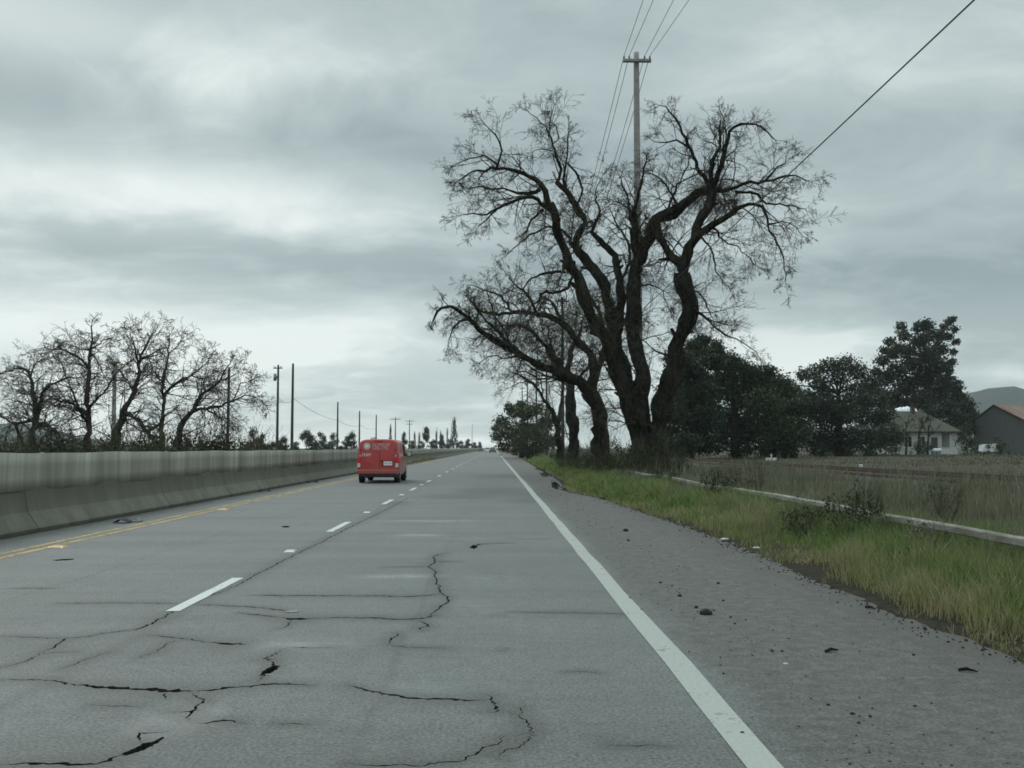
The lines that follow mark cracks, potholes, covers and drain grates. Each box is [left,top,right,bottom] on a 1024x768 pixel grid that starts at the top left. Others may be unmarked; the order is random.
crack [0,635,329,766]
crack [350,707,534,766]
crack [197,554,450,648]
crack [353,686,500,712]
